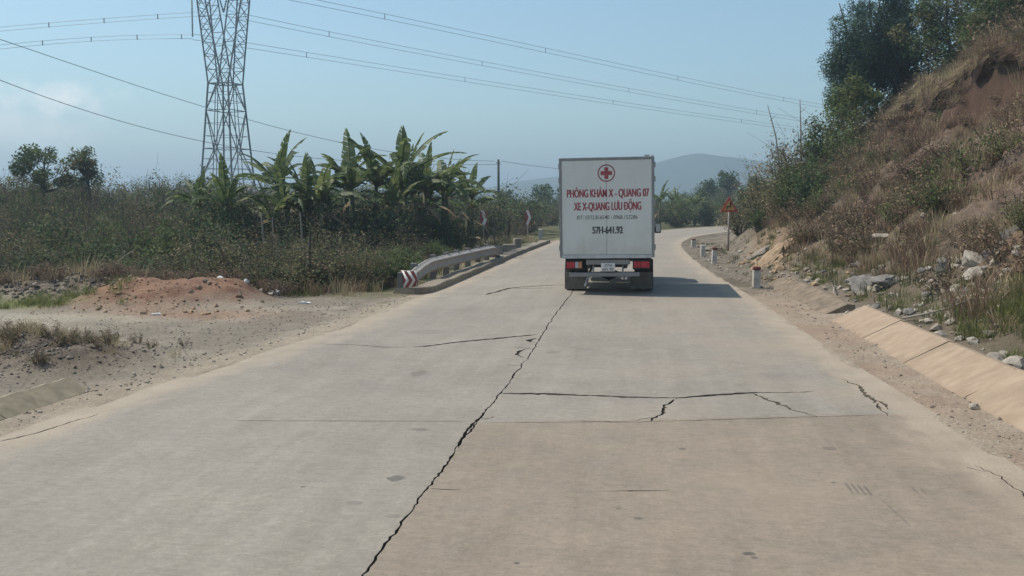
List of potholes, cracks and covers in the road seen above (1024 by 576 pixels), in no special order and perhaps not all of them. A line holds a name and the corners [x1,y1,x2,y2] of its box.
crack [842,379,888,416]
crack [334,285,817,576]
